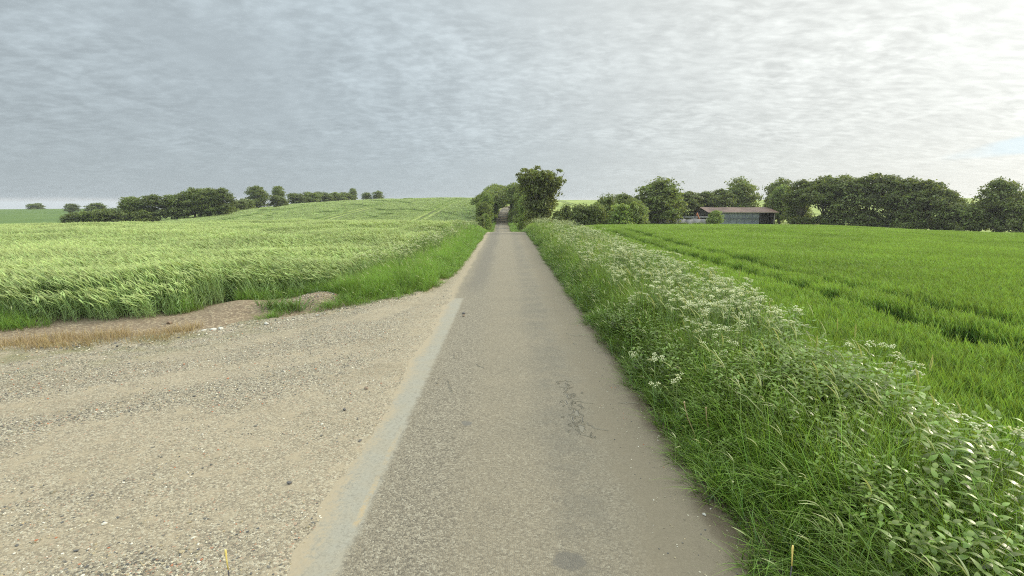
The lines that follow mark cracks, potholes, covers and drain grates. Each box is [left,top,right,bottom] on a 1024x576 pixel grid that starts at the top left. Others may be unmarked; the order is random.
crack [556,380,608,438]
